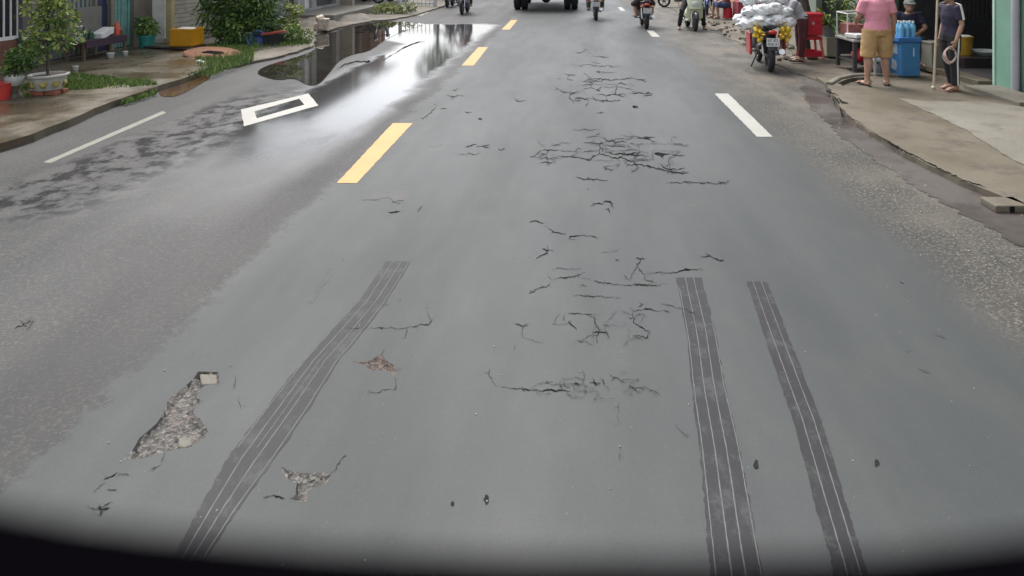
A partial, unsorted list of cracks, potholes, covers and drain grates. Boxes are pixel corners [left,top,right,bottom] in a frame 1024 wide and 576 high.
crack [530,49,729,213]
crack [528,220,724,346]
pothole [124,371,220,459]
crack [484,369,656,456]
pothole [280,468,332,502]
pothole [353,354,397,375]
